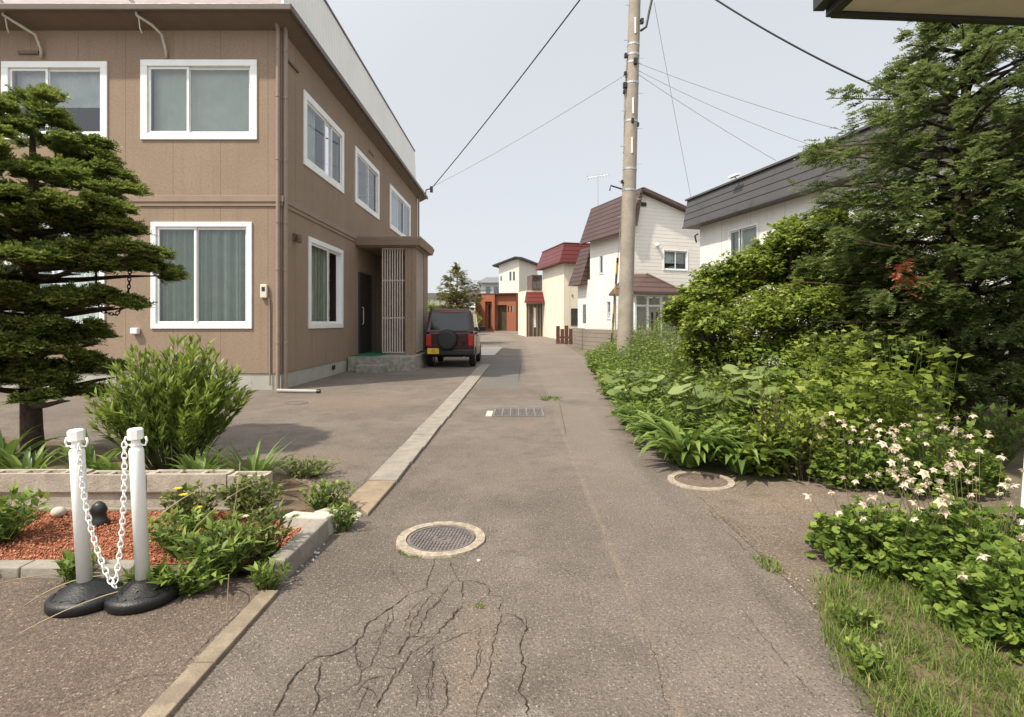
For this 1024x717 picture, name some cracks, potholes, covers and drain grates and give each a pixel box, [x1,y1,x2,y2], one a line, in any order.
crack [274,559,529,716]
manhole cover [396,521,486,559]
manhole cover [667,471,736,491]
drain grate [486,408,545,417]
